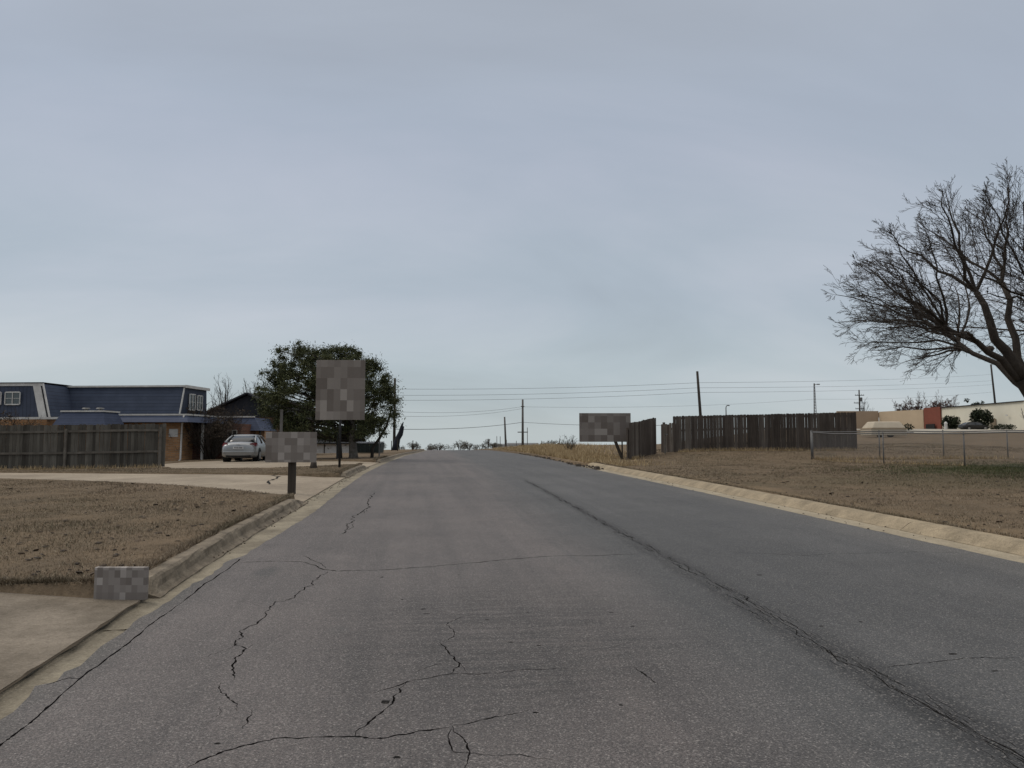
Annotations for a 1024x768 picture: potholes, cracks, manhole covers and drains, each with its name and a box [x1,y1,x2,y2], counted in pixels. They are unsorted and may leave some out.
crack [187,554,629,768]
crack [344,493,375,533]
